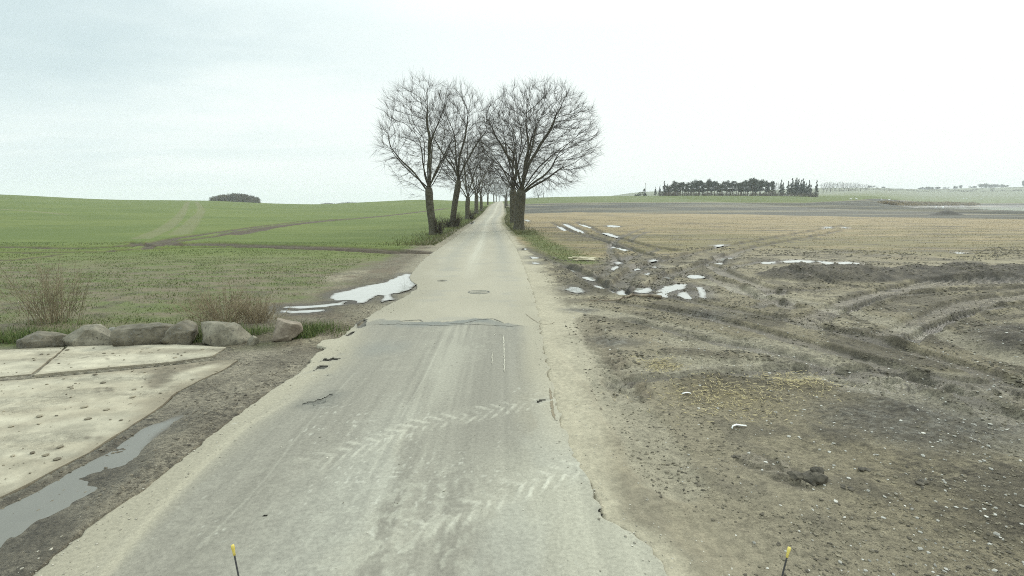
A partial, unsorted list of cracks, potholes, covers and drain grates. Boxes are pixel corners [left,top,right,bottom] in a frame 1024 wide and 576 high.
pothole [302,394,333,406]
